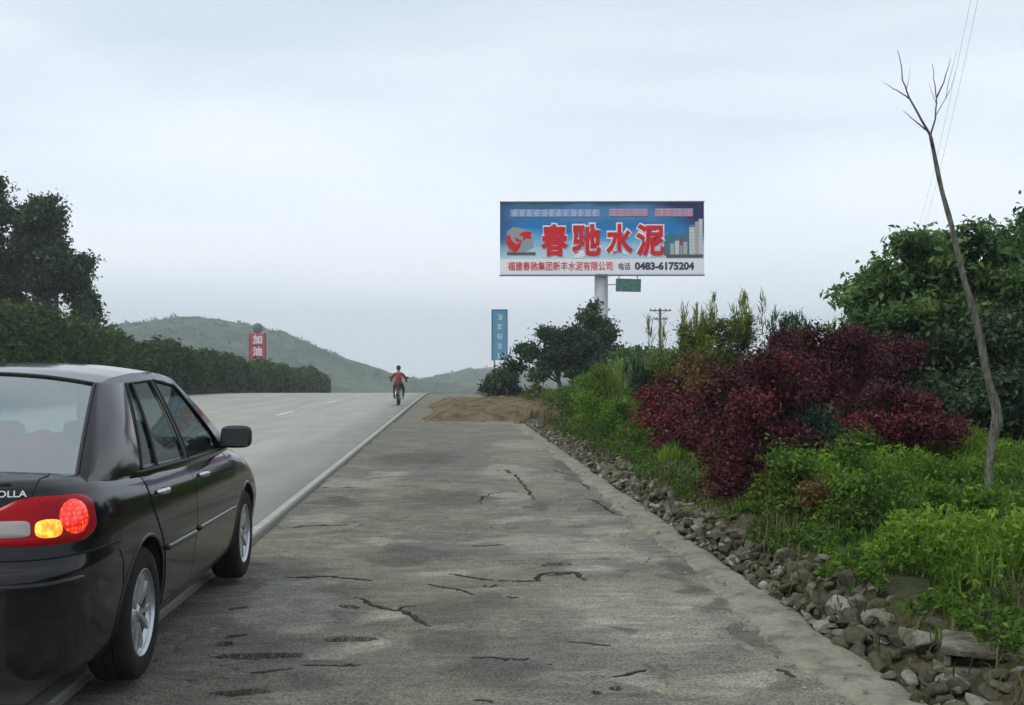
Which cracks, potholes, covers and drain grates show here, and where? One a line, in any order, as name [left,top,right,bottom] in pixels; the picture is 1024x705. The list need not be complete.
pothole [209,652,304,660]
crack [611,669,647,677]
crack [479,469,535,504]
crack [287,572,586,627]
crack [554,470,624,516]
